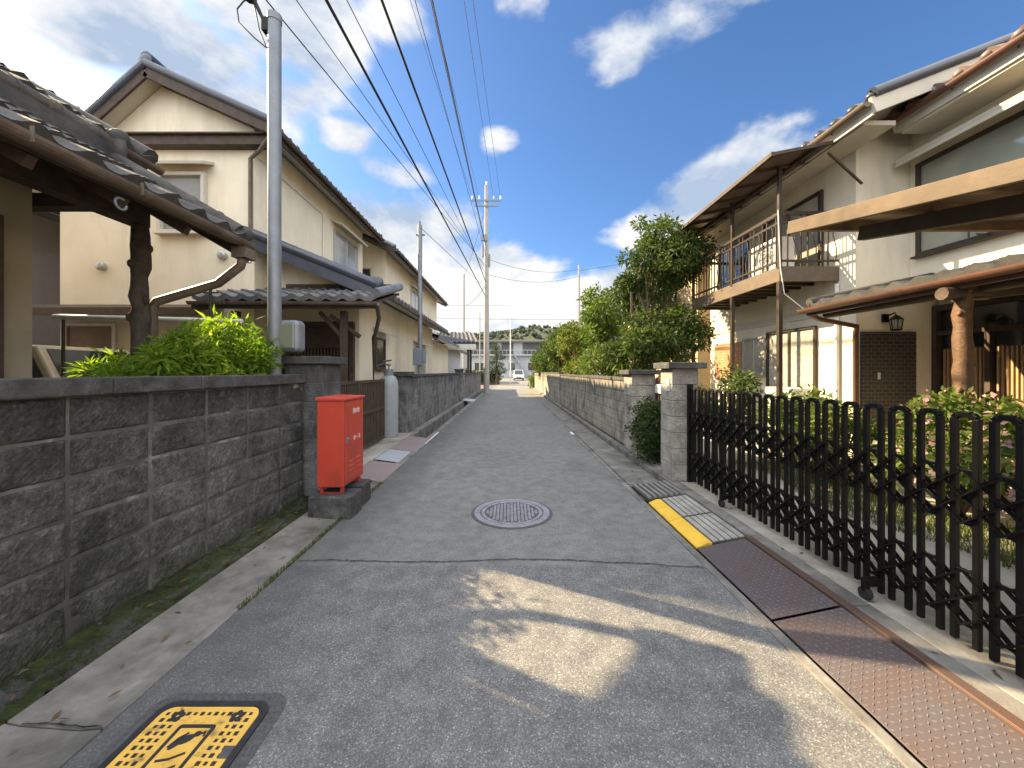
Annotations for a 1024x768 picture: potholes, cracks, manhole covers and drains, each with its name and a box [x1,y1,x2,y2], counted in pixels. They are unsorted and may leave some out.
manhole cover [471,499,552,529]
